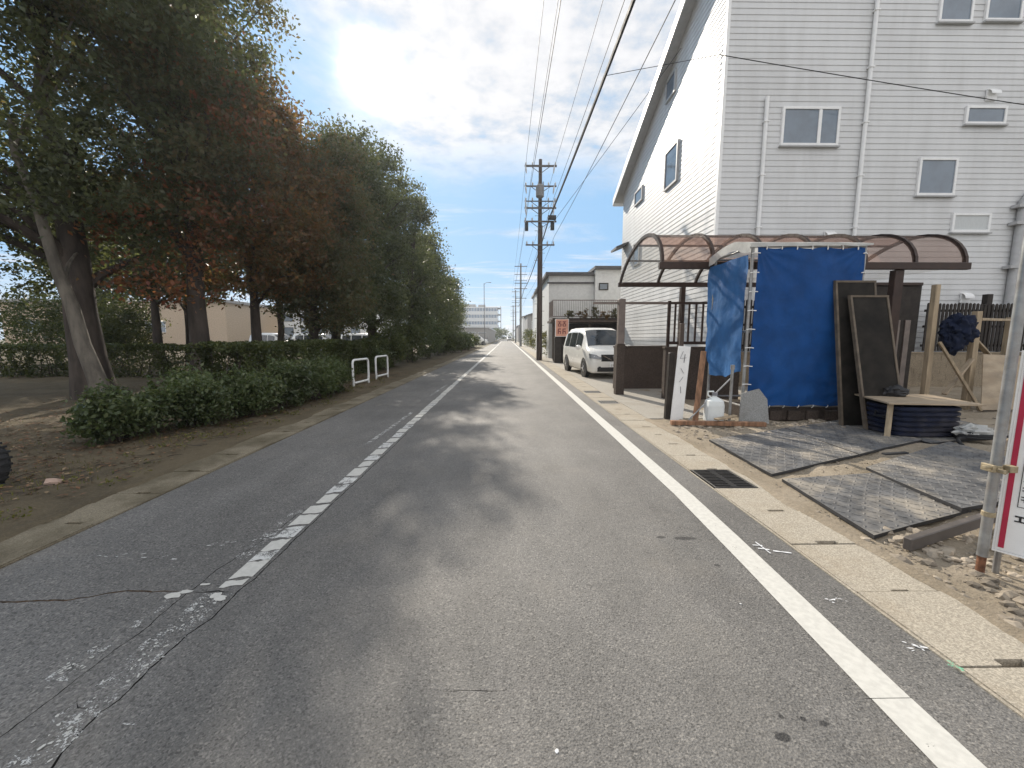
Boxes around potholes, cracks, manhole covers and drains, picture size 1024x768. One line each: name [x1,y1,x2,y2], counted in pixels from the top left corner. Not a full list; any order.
drain grate [691,470,758,489]
crack [0,511,301,737]
